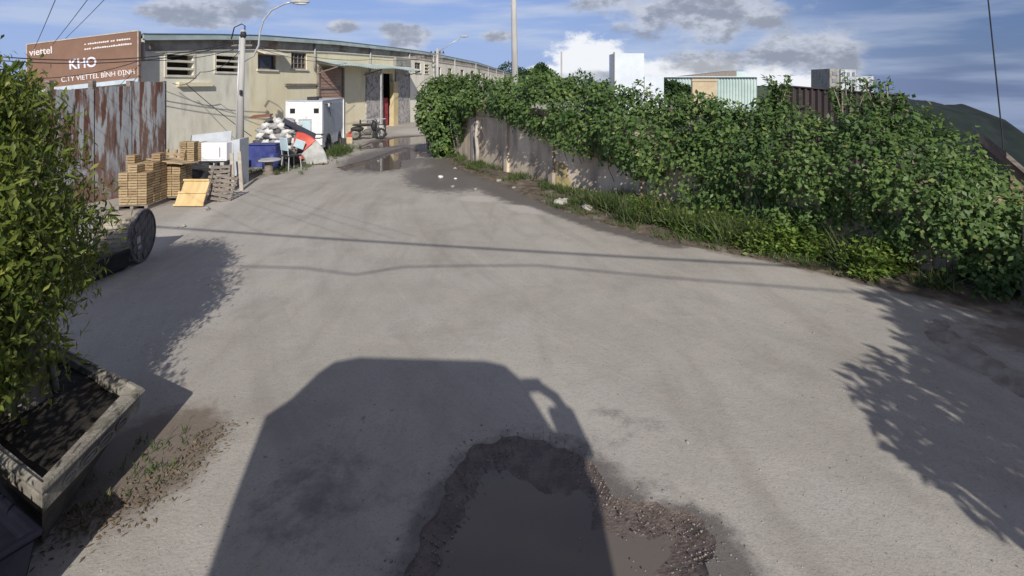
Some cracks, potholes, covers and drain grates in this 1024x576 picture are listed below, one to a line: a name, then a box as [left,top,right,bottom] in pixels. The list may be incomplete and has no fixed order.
pothole [404,435,716,576]
